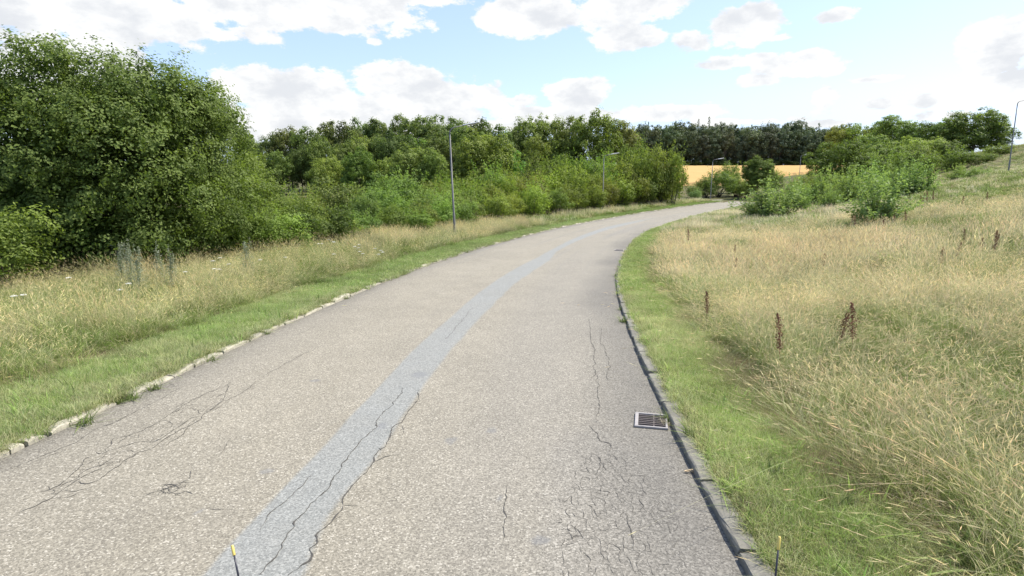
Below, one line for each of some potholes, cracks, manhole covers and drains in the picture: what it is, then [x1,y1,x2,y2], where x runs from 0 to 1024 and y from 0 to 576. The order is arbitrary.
crack [557,320,686,576]
crack [259,387,420,575]
drain grate [634,412,668,430]
crack [5,351,309,512]
